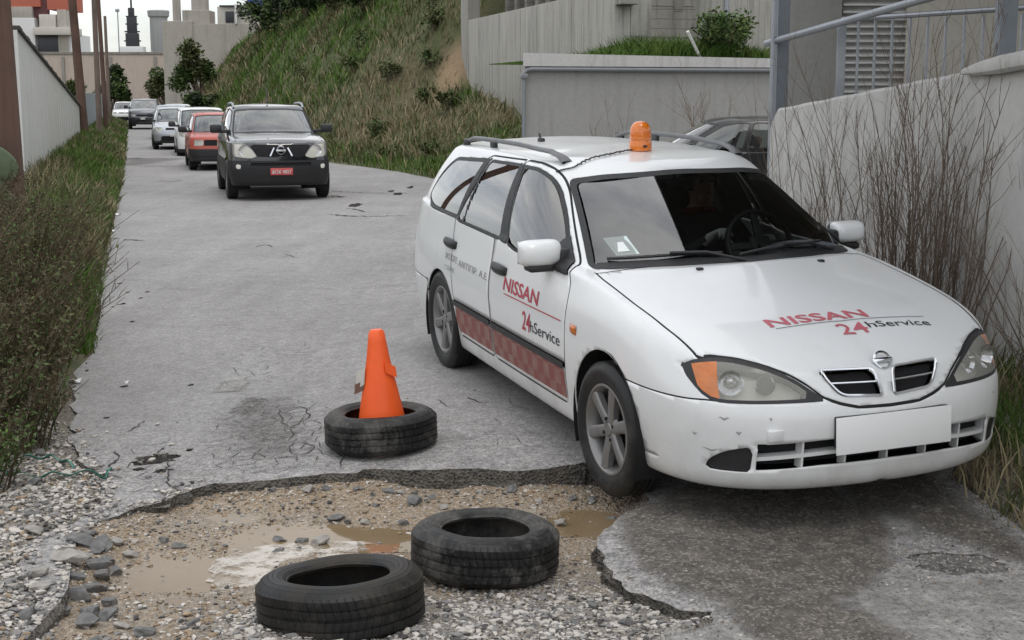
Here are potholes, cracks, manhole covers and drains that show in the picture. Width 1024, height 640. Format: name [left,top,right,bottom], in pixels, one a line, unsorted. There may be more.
crack [212,393,344,473]
crack [103,421,183,493]
pothole [0,479,713,640]
pothole [133,456,178,466]
